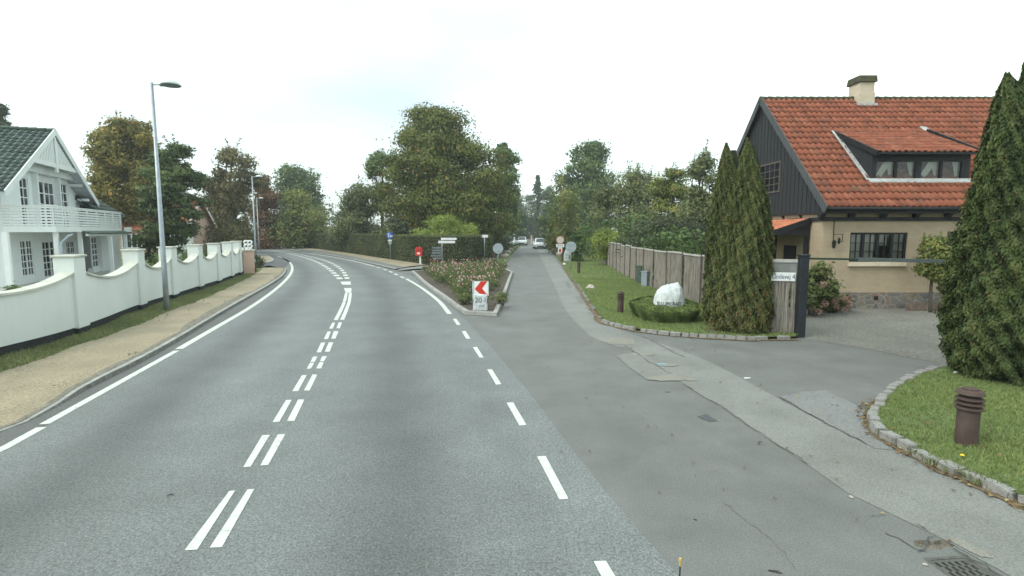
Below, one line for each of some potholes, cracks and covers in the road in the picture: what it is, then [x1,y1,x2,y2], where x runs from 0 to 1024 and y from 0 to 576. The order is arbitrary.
drain grate [923,555,998,576]
crack [886,522,1002,576]
